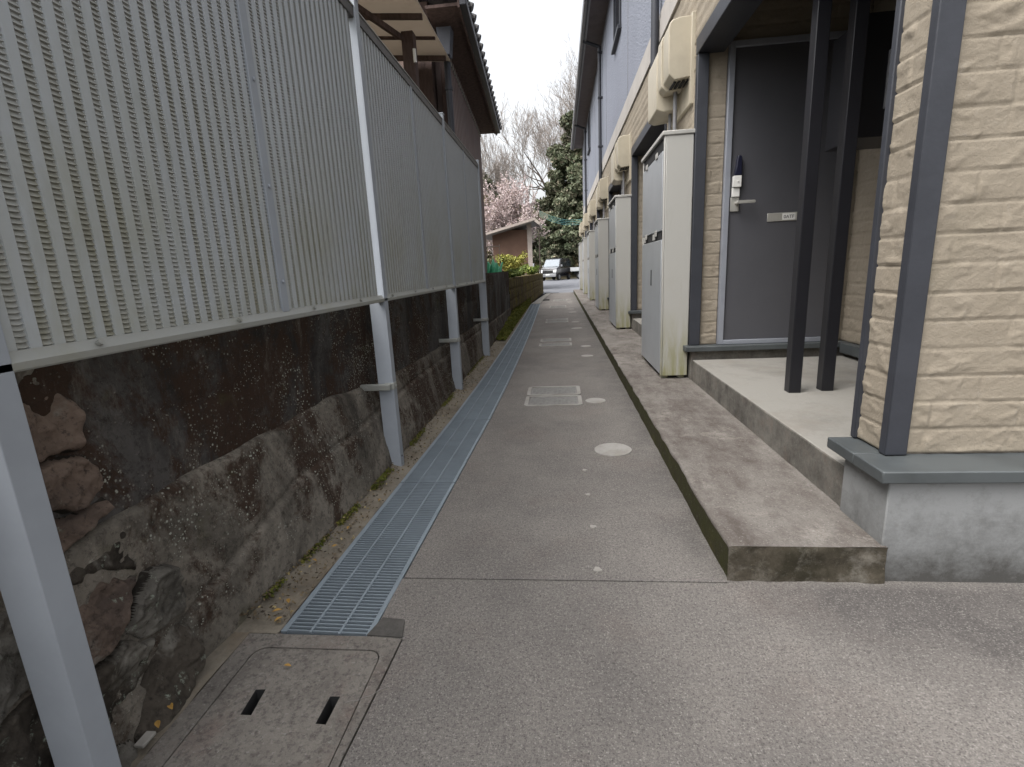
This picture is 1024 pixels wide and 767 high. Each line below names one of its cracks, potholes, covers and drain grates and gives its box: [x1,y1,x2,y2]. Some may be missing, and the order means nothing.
drain grate [451,385,507,420]
manhole cover [595,443,632,457]
drain grate [477,363,517,386]
drain grate [493,348,524,364]
drain grate [281,483,455,636]
drain grate [510,329,531,338]
drain grate [401,420,490,484]
drain grate [503,337,528,349]
